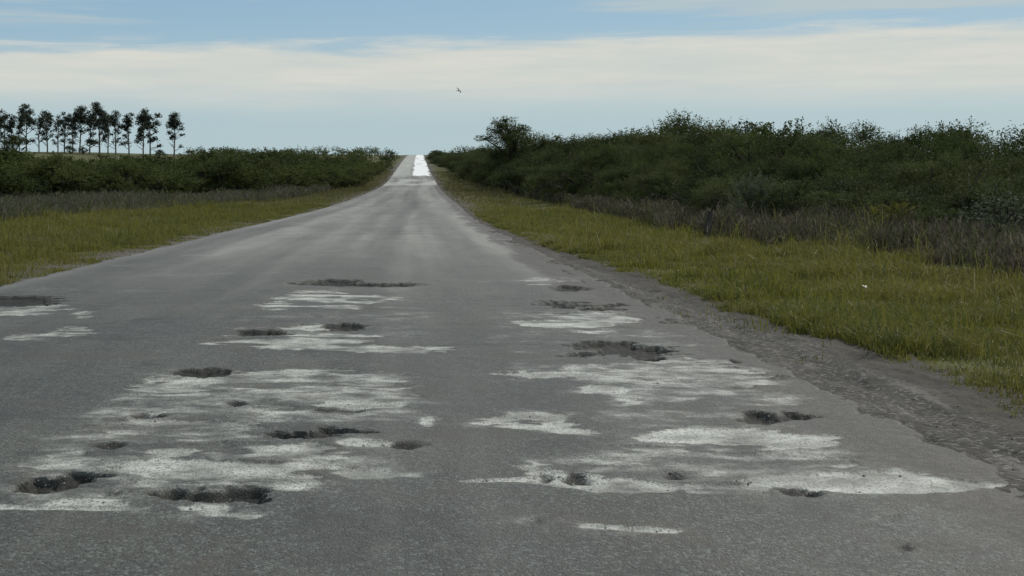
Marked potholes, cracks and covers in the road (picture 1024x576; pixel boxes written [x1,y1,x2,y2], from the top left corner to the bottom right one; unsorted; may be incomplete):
pothole [387,440,431,450]
pothole [531,300,629,311]
pothole [536,473,558,484]
pothole [169,367,232,378]
pothole [262,426,380,439]
pothole [0,296,68,307]
pothole [559,472,597,486]
pothole [733,410,822,425]
pothole [323,322,367,331]
pothole [6,470,120,494]
pothole [560,340,679,362]
pothole [289,279,422,287]
